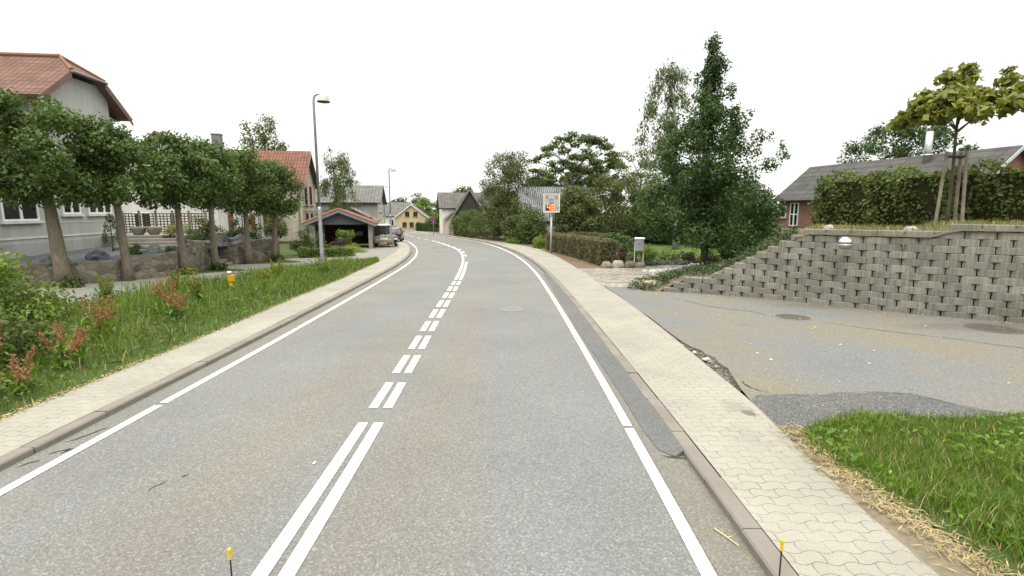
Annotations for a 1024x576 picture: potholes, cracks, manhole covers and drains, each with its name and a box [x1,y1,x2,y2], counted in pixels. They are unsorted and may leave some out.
manhole cover [964,323,1024,334]
manhole cover [772,313,814,321]
crack [19,427,108,467]
